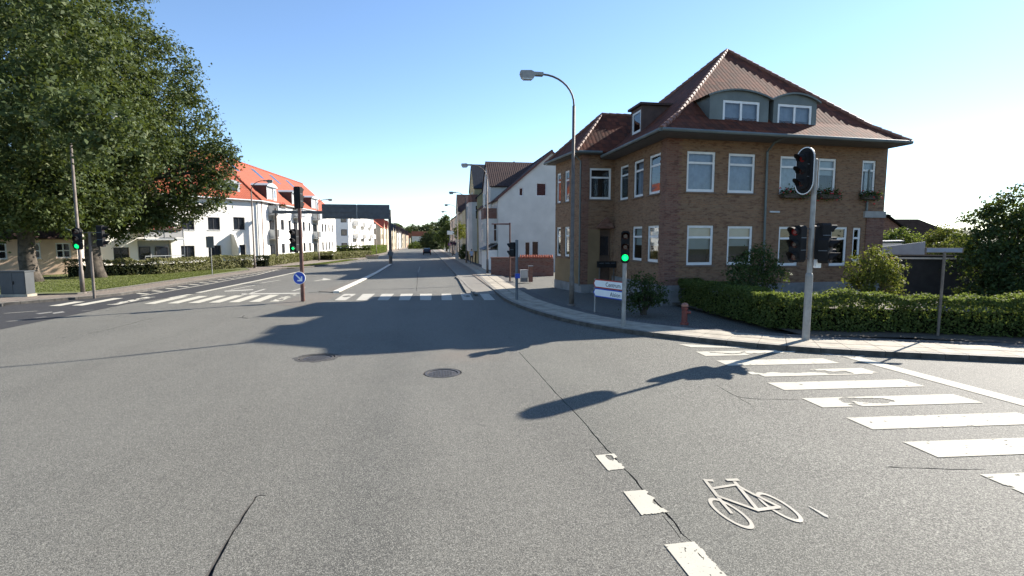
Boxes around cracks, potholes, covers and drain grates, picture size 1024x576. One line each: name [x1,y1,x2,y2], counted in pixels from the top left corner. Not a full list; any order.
crack [519,352,692,542]
manhole cover [292,353,341,362]
crack [205,495,266,576]
manhole cover [423,368,462,378]
